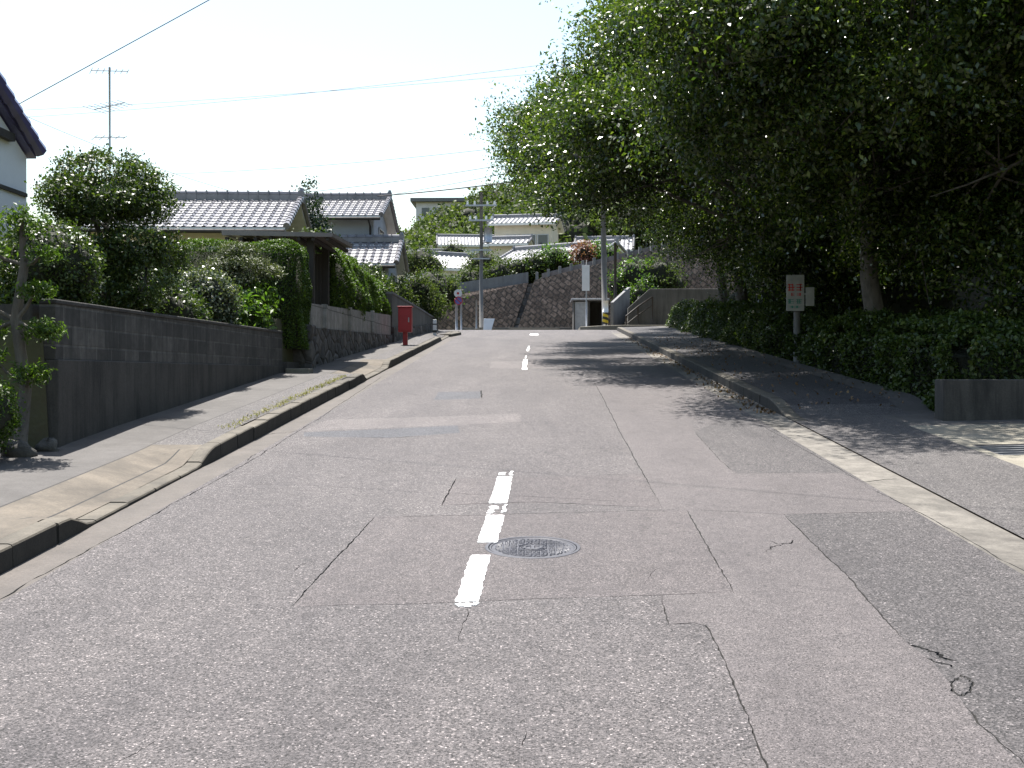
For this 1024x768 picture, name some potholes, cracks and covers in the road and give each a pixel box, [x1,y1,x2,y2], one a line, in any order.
manhole cover [485,536,581,559]
crack [281,384,1024,768]
